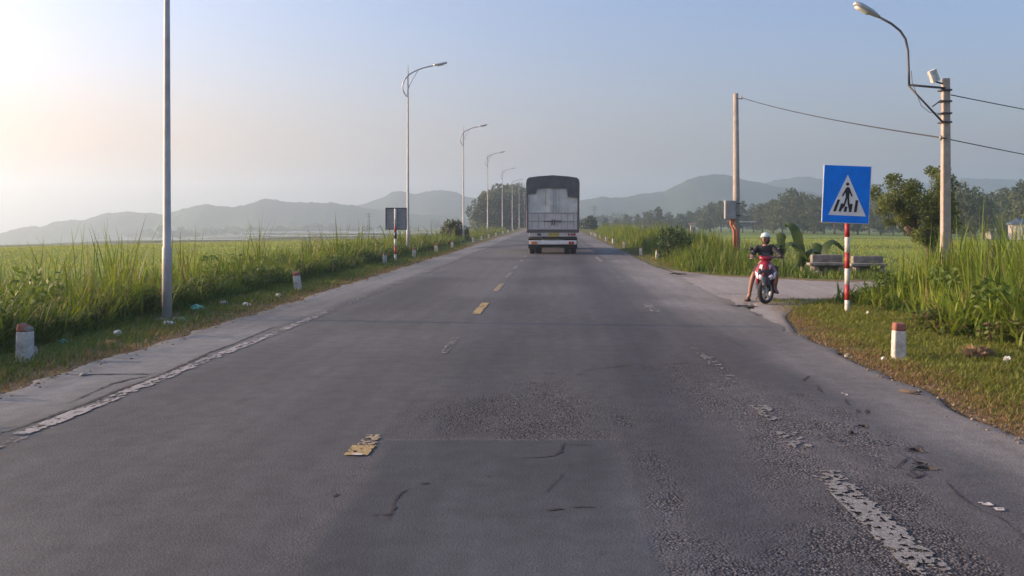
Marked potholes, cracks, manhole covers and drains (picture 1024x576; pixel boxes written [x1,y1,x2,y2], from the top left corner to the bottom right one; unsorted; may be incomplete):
crack [523,443,593,510]
crack [370,482,430,519]
